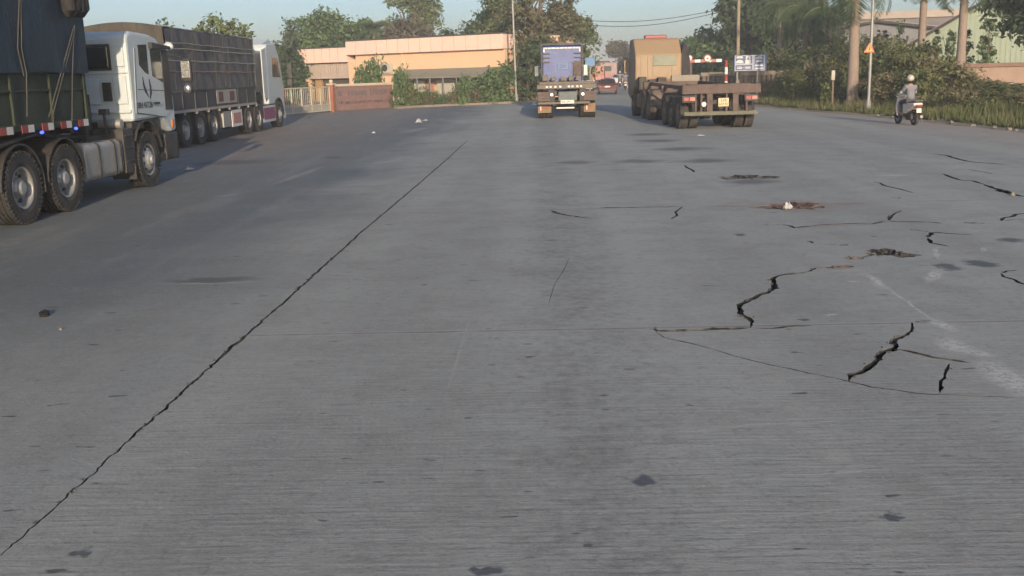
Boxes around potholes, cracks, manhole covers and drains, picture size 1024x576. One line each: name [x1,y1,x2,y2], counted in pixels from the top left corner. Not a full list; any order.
crack [1001,270,1024,285]
crack [652,182,1016,398]
crack [551,206,683,219]
crack [938,154,1024,221]
pothole [748,201,825,210]
pothole [863,248,921,258]
